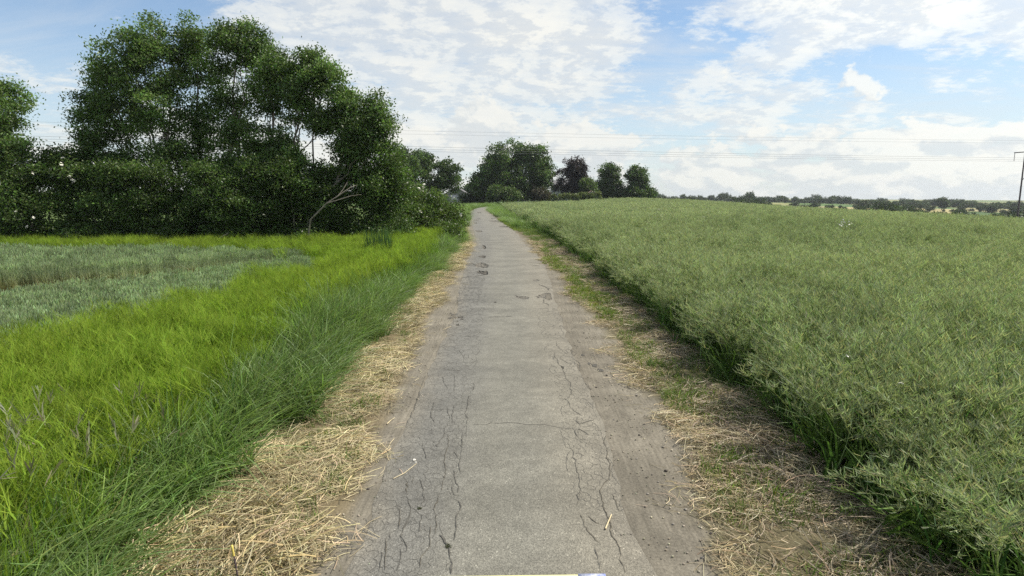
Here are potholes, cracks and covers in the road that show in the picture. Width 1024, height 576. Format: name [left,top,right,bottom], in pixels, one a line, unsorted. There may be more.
crack [347,263,625,576]
